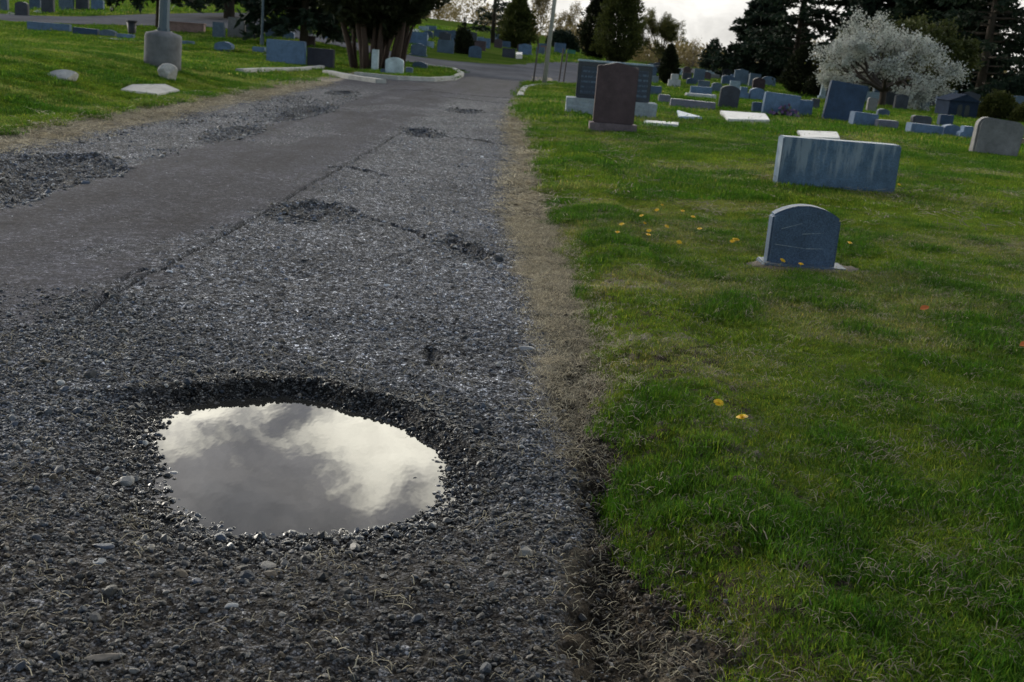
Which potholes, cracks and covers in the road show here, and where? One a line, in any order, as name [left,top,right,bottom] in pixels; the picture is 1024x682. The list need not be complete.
pothole [269,201,355,223]
pothole [443,238,496,267]
pothole [0,375,581,604]
crack [328,166,390,177]
pothole [0,153,139,206]
pothole [405,128,440,138]
crack [350,209,440,240]
